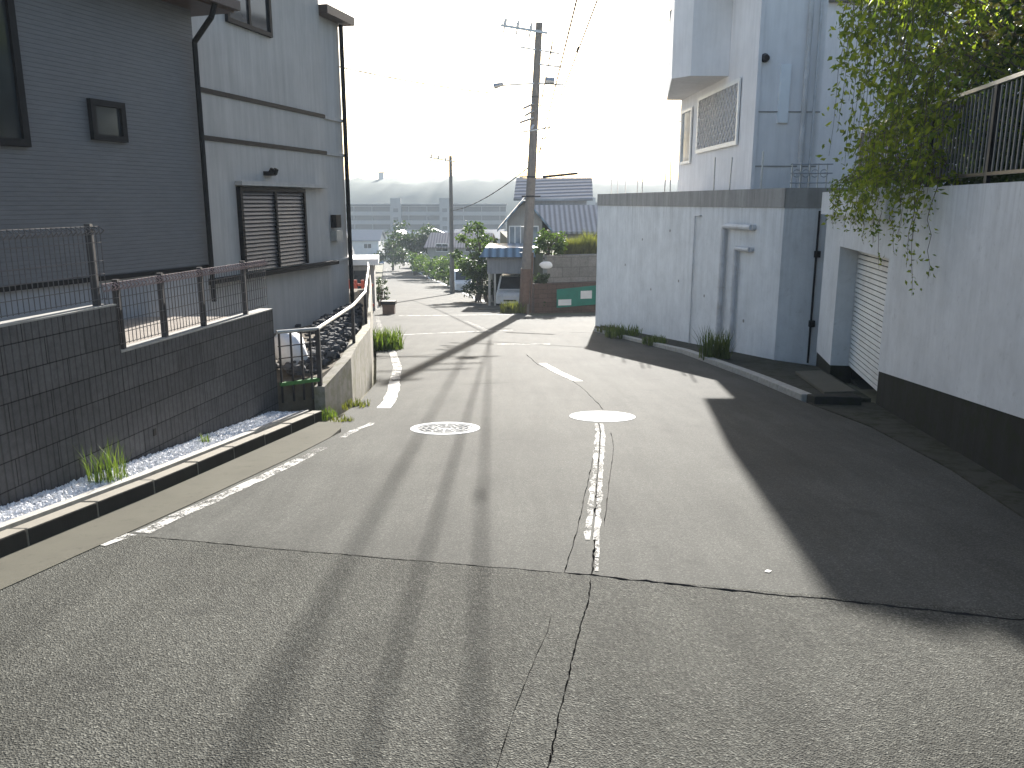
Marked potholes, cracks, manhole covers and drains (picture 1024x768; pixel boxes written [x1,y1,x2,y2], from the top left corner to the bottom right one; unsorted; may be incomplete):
manhole cover [410,422,480,435]
manhole cover [570,411,636,422]
crack [496,355,602,768]
